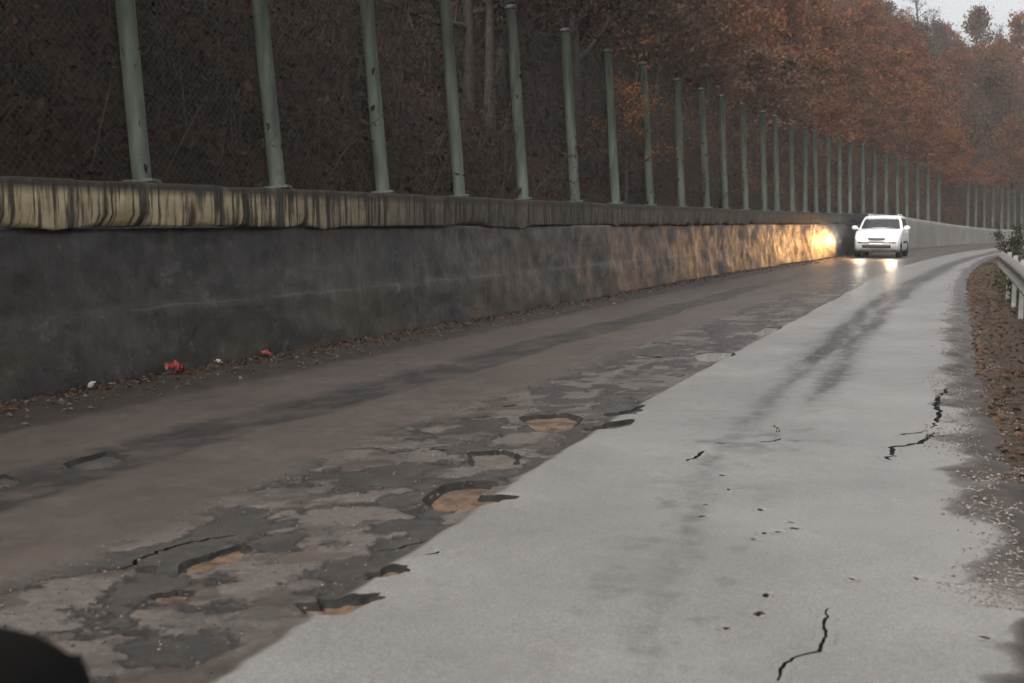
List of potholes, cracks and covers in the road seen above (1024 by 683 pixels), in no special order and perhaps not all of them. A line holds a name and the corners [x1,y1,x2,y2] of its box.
pothole [417,479,525,513]
pothole [59,450,133,471]
pothole [516,413,586,433]
crack [767,605,839,683]
crack [879,387,952,463]
pothole [463,449,527,469]
pothole [285,591,392,618]
pothole [172,542,258,577]
pothole [601,404,647,419]
crack [115,534,244,571]
crack [681,423,790,461]
pothole [358,562,416,583]
